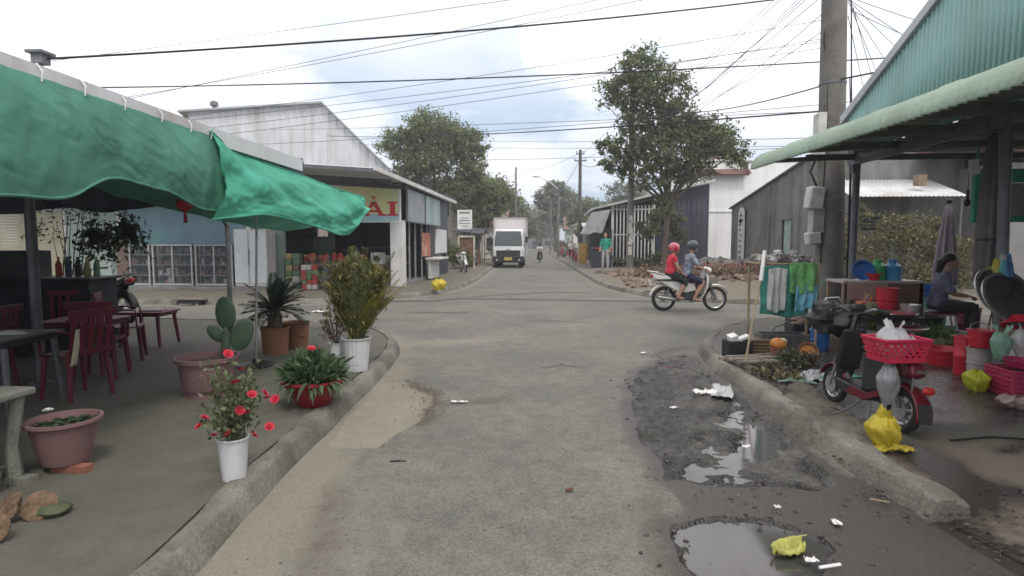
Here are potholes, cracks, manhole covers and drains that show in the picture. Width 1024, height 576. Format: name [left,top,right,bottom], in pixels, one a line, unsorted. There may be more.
pothole [627,355,841,491]
pothole [670,516,837,576]
drain grate [173,298,208,306]
